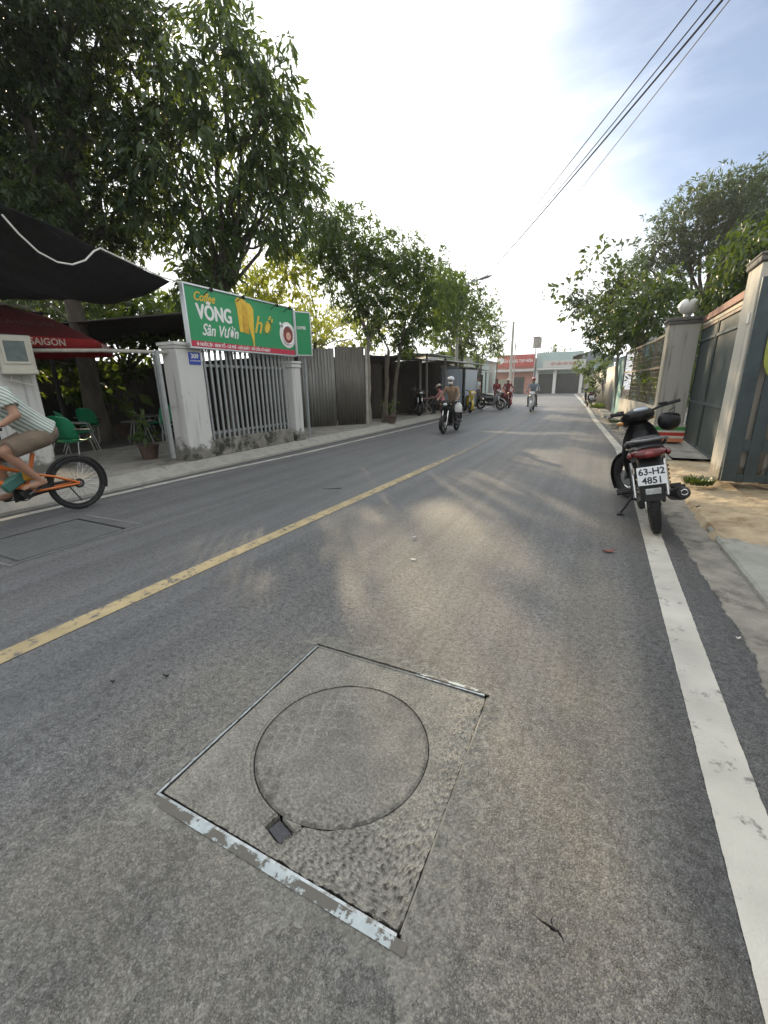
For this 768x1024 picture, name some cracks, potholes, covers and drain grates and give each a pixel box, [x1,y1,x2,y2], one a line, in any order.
manhole cover [0,515,144,566]
manhole cover [118,633,515,1024]
crack [532,913,564,942]
